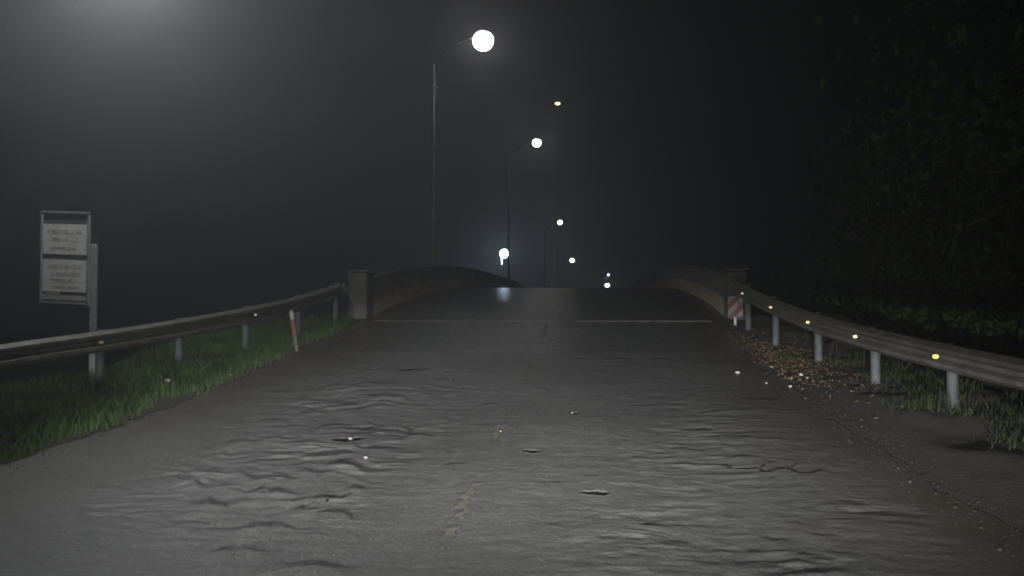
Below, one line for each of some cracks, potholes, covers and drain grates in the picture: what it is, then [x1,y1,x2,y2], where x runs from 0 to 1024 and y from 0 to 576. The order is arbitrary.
pothole [575,489,615,497]
crack [726,462,820,473]
